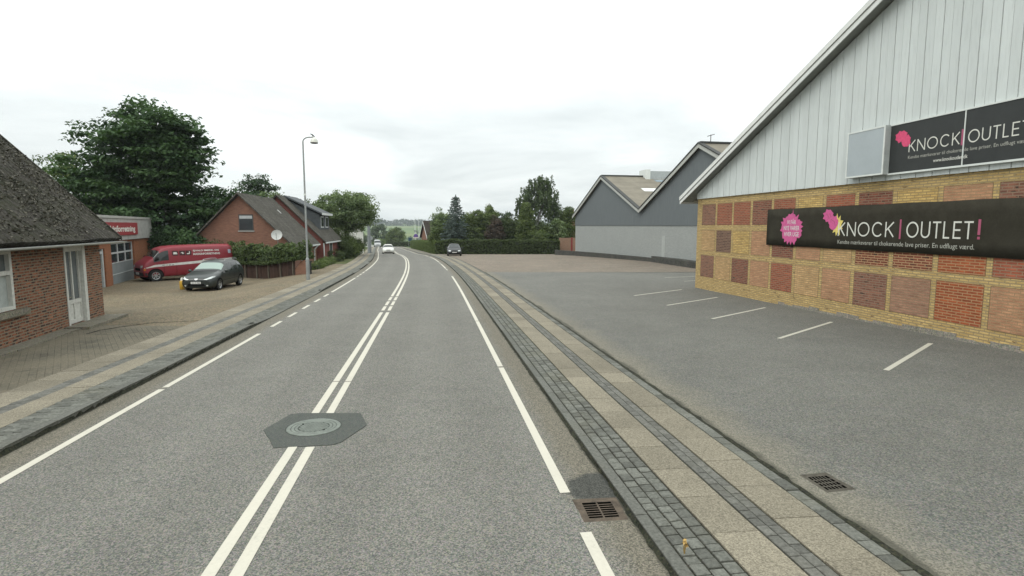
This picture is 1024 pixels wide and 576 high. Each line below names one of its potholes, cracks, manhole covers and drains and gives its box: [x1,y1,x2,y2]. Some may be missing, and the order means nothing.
drain grate [572,497,629,522]
drain grate [800,472,856,493]
manhole cover [285,418,342,436]
